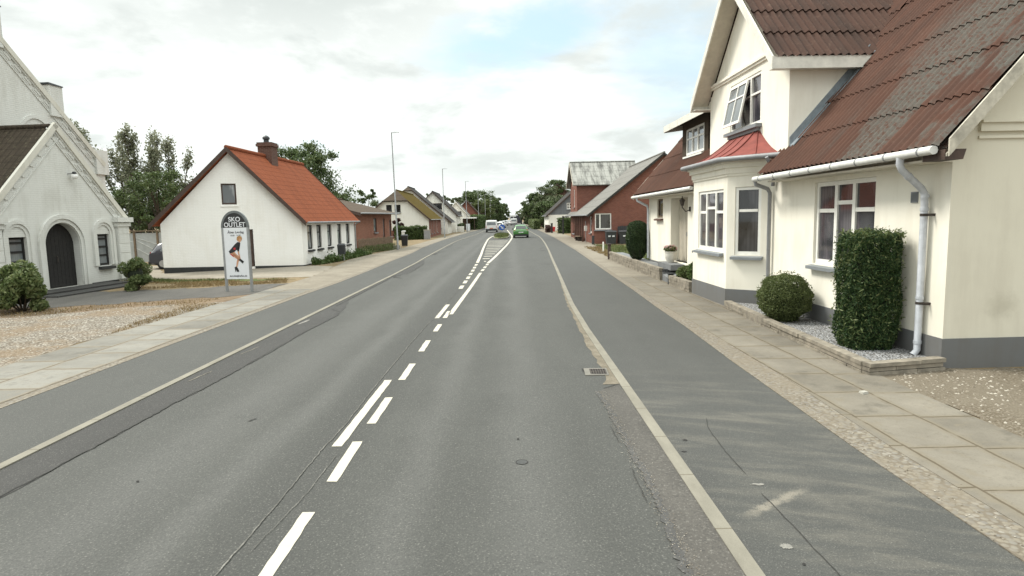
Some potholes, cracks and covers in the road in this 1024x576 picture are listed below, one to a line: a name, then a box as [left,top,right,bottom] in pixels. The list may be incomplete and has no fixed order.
crack [595,384,747,576]
drain grate [584,368,609,376]
crack [761,493,841,576]
